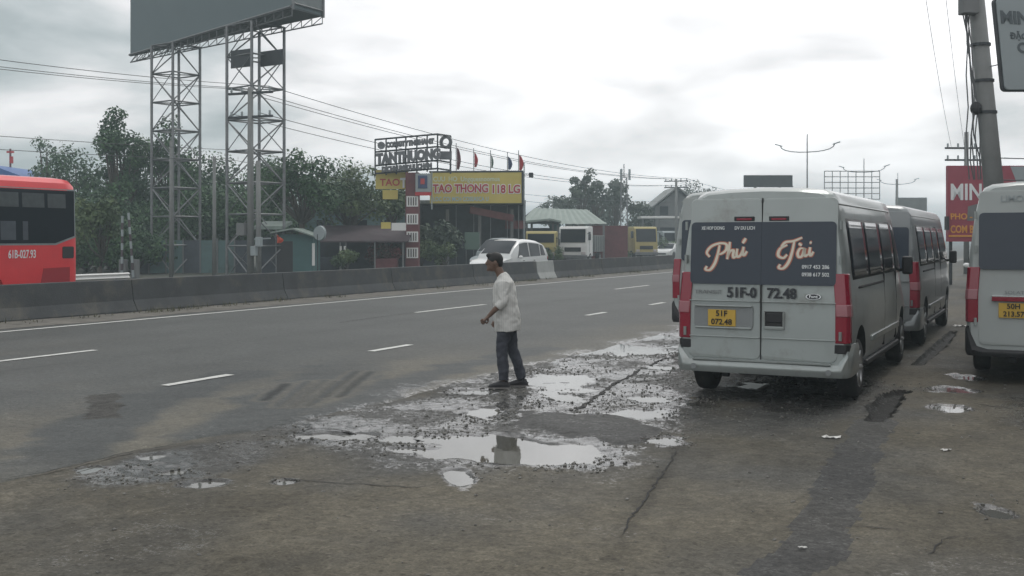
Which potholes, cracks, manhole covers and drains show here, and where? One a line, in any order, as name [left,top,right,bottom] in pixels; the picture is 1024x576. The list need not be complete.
pothole [616,393,682,404]
pothole [925,403,974,413]
crack [574,356,677,411]
crack [621,451,679,536]
pothole [381,445,416,456]
pothole [552,340,680,366]
pothole [440,387,499,395]
pothole [927,385,982,393]
pothole [976,503,1020,520]
pothole [438,465,478,487]
pothole [135,451,172,460]
